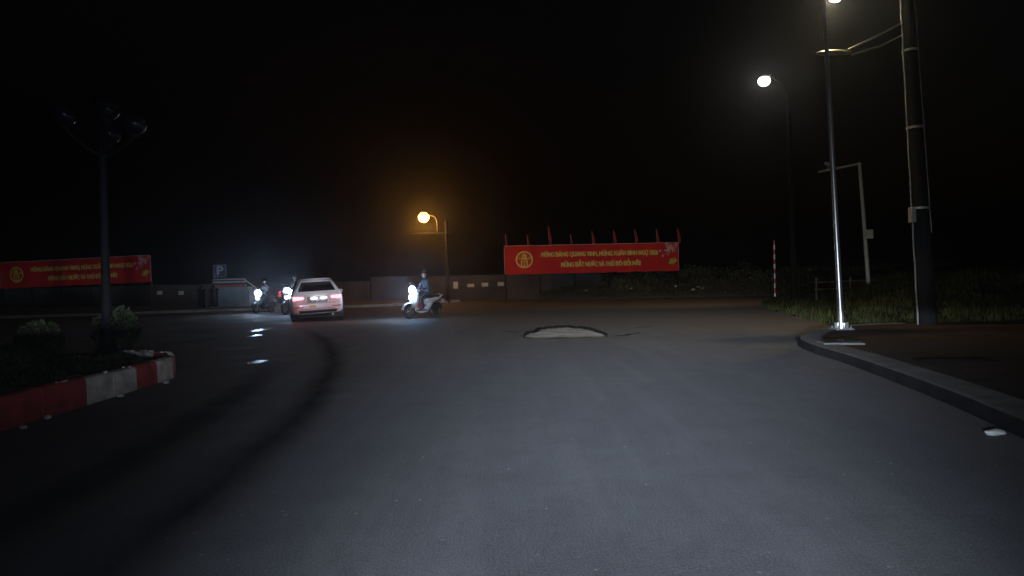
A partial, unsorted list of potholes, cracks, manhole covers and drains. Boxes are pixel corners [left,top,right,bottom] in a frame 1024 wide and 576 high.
pothole [523,325,608,339]
